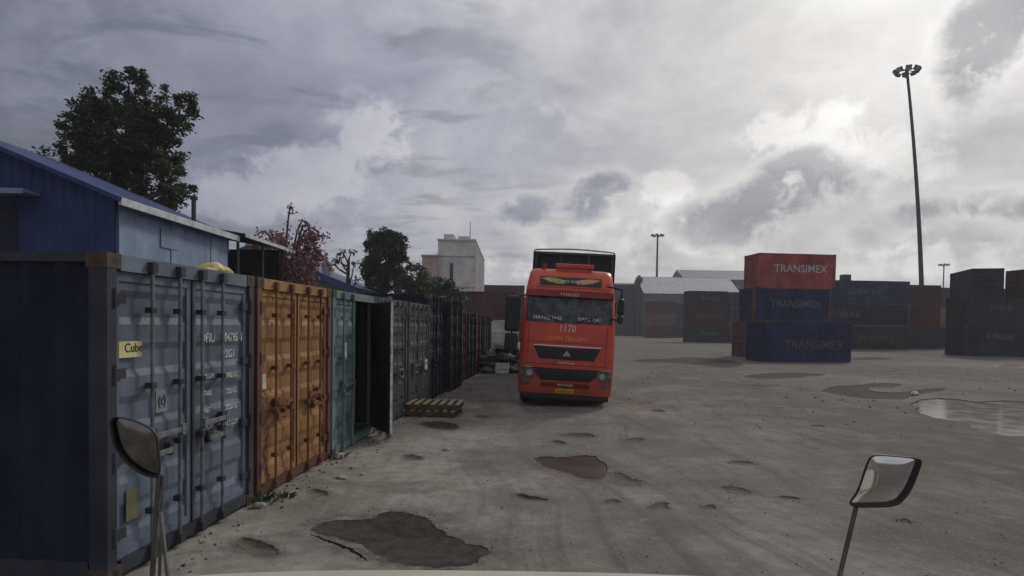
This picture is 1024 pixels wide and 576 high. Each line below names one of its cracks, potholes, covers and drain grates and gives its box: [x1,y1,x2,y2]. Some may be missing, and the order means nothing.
pothole [910,398,1024,436]
pothole [649,502,670,511]
pothole [614,472,642,486]
pothole [420,422,459,430]
crack [310,534,368,561]
pothole [237,537,279,557]
pothole [720,486,753,495]
pothole [534,455,608,480]
